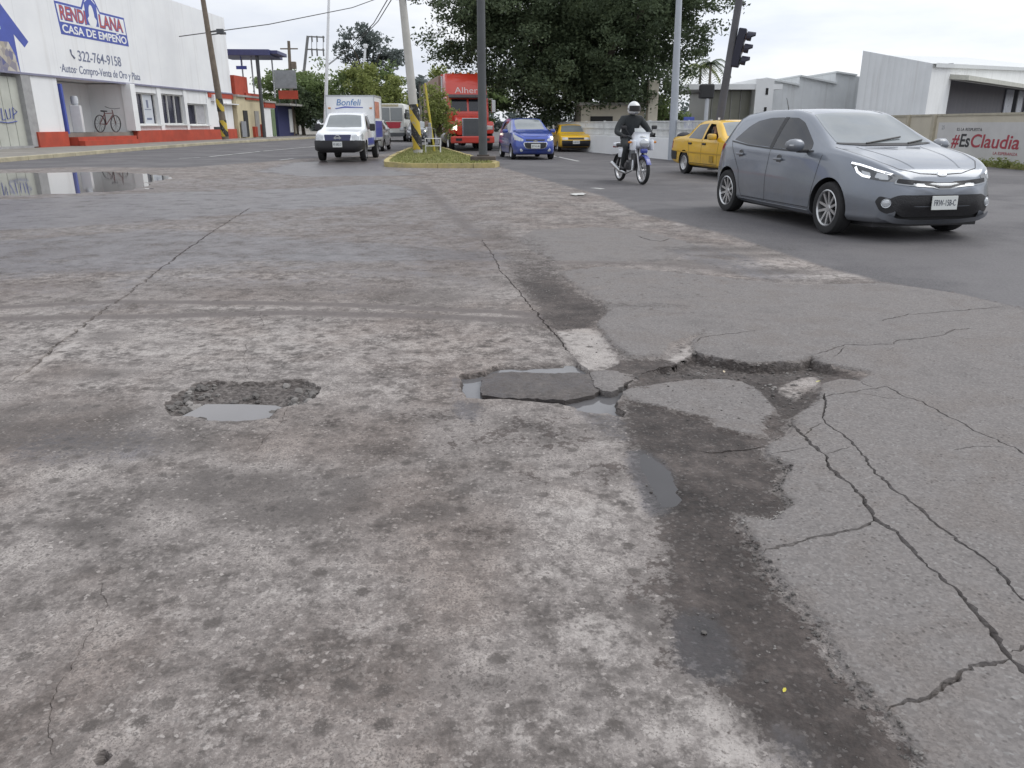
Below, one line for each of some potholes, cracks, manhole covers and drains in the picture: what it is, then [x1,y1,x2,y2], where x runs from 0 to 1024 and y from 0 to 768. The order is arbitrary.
pothole [632,350,863,441]
crack [701,381,1024,712]
crack [481,240,579,363]
crack [47,582,108,755]
pothole [163,379,321,421]
crack [10,208,250,383]
pothole [459,349,634,418]
crack [815,307,994,357]
